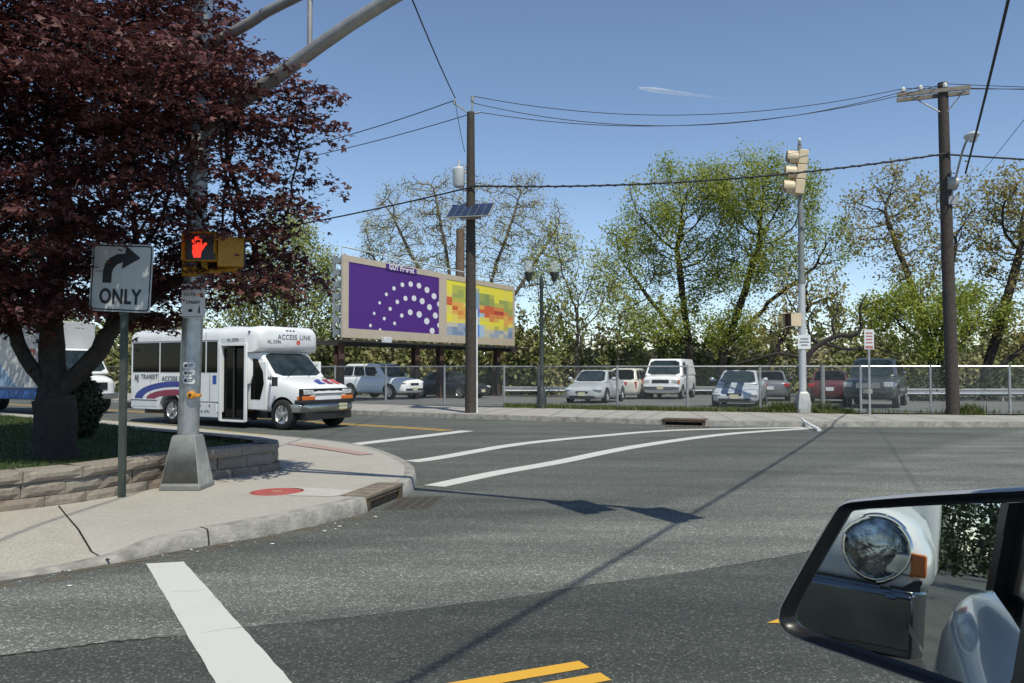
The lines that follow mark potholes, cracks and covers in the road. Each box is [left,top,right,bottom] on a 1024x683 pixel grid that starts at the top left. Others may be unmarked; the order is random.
manhole cover [250,488,304,496]
drain grate [662,418,709,428]
drain grate [340,482,445,511]
